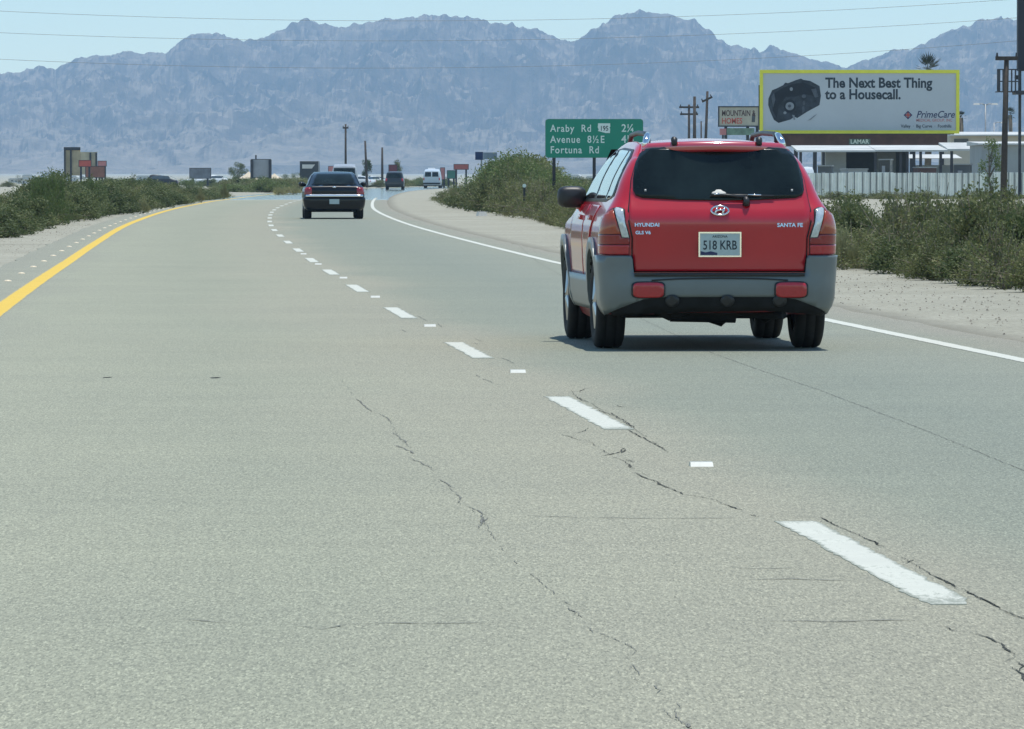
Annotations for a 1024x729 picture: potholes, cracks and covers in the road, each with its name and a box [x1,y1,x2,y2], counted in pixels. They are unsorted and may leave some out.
crack [540,388,1024,618]
crack [943,619,1024,680]
crack [341,381,692,729]
